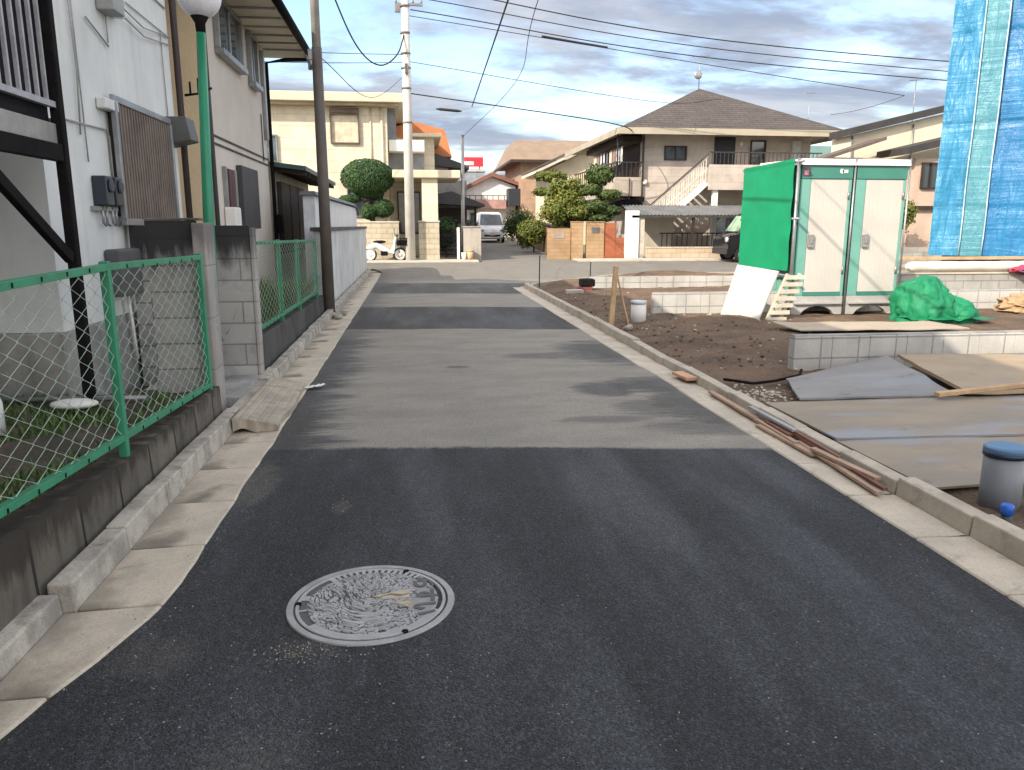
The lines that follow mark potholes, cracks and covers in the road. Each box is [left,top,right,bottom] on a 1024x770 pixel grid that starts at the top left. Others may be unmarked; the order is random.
manhole cover [286,565,455,647]
